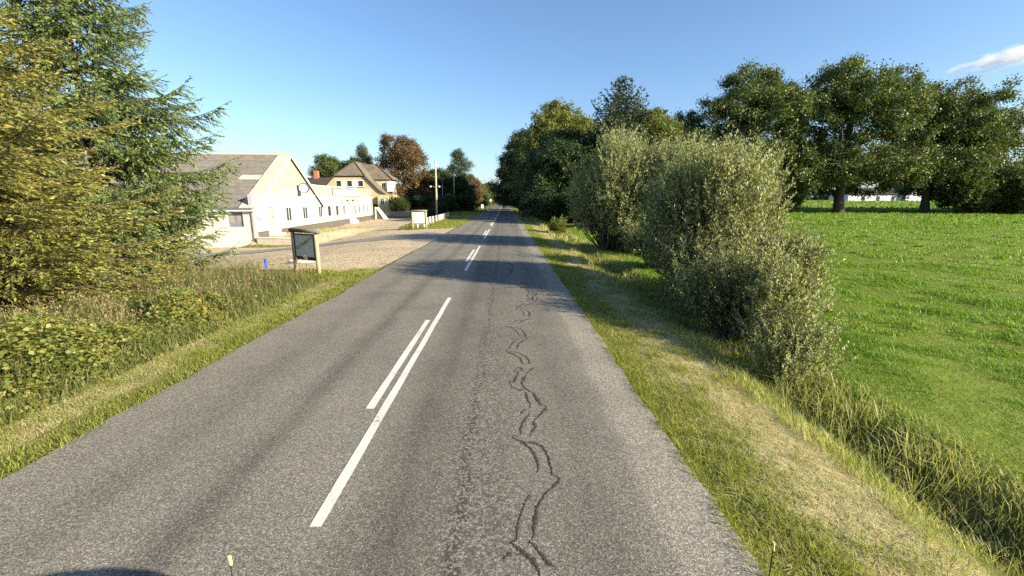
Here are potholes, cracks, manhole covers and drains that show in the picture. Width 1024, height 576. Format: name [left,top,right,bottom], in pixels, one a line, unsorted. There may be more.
crack [503,281,560,576]
